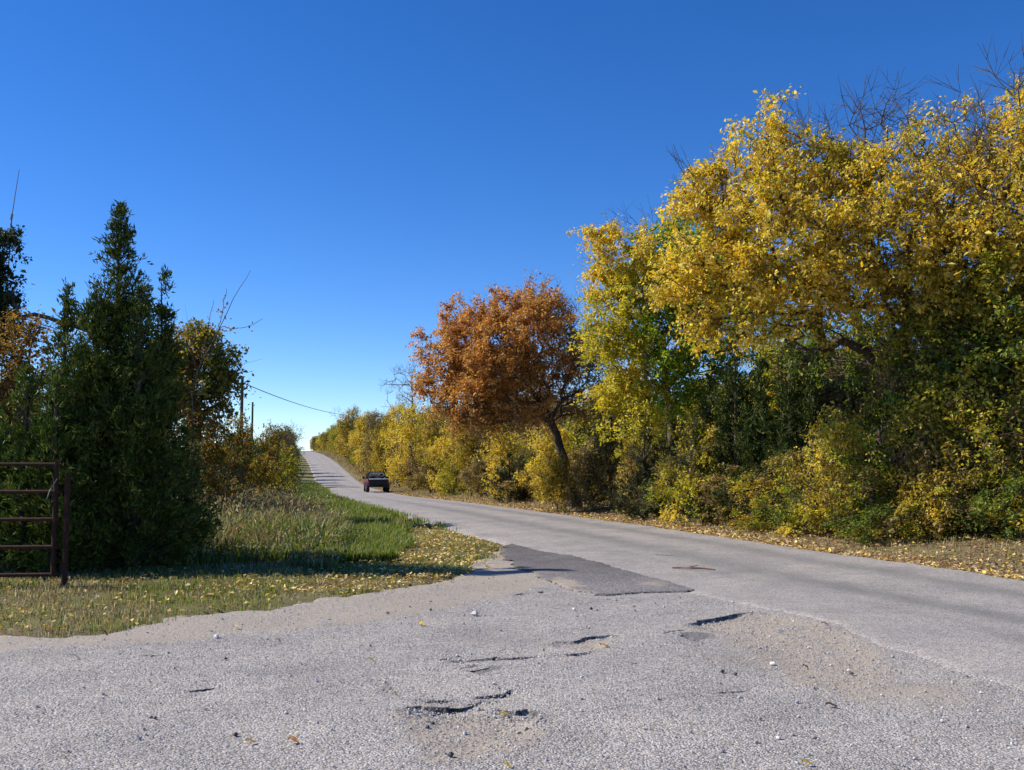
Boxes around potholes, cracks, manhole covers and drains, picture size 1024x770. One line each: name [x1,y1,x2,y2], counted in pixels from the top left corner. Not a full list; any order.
pothole [391,699,553,769]
pothole [668,632,723,642]
pothole [538,635,619,651]
